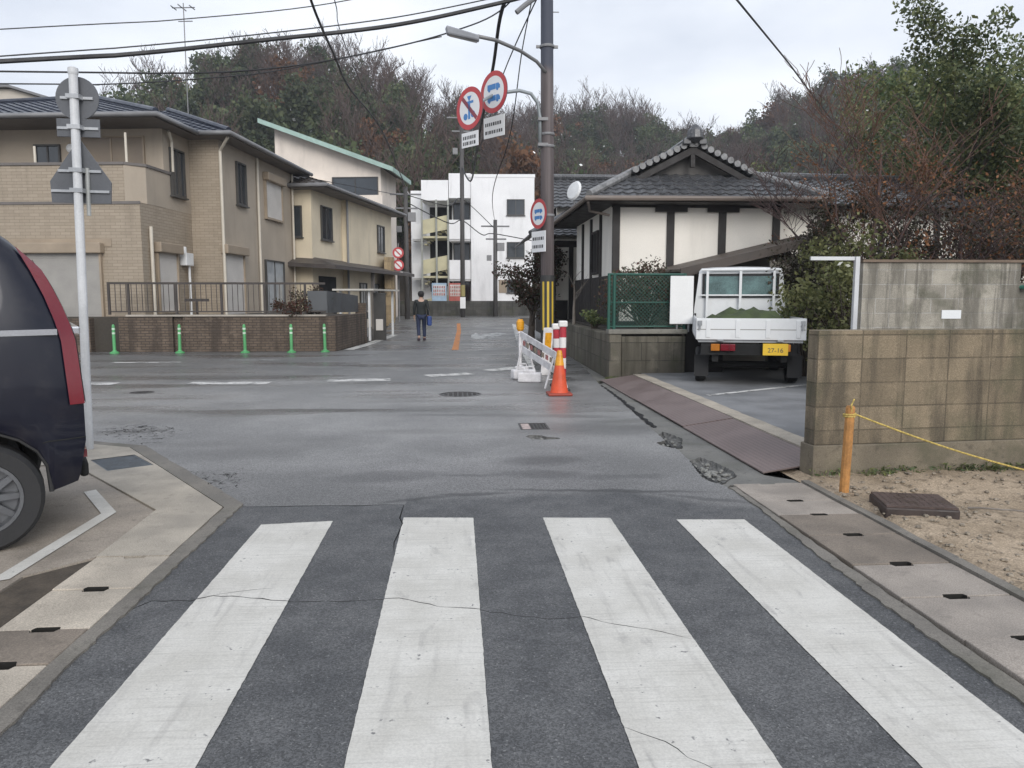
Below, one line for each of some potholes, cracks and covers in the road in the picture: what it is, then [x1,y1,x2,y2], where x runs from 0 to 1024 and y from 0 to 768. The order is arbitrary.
pothole [657,432,683,449]
crack [601,385,657,428]
pothole [690,457,737,484]
manhole cover [869,492,960,520]
crack [134,599,576,619]
